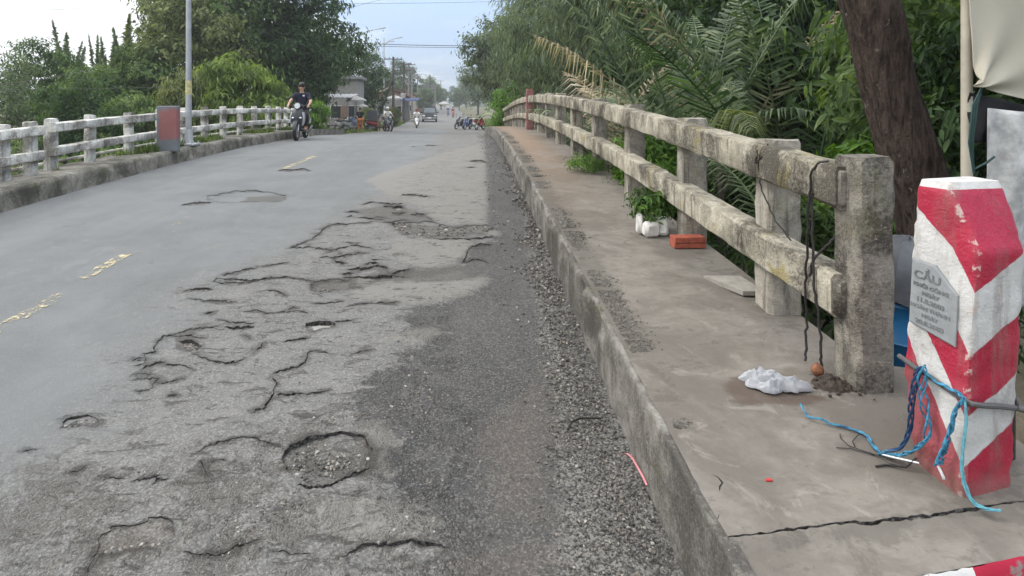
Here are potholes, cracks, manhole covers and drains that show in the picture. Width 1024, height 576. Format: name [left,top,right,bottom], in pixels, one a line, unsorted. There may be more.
pothole [282,431,373,485]
pothole [306,321,335,331]
crack [130,194,493,412]
pothole [61,414,99,428]
crack [182,539,309,556]
pothole [207,190,286,203]
crack [103,436,280,485]
